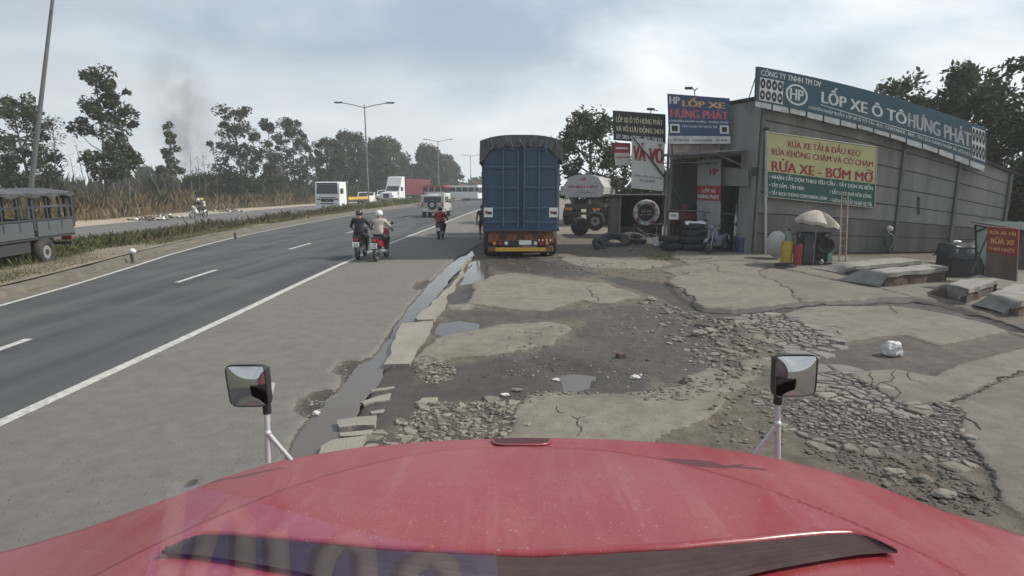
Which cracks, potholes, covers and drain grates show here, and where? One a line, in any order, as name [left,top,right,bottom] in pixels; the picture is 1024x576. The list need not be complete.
crack [664,263,1023,352]
pothole [292,388,337,419]
crack [825,369,1023,500]
pothole [430,318,488,338]
pothole [446,354,648,401]
